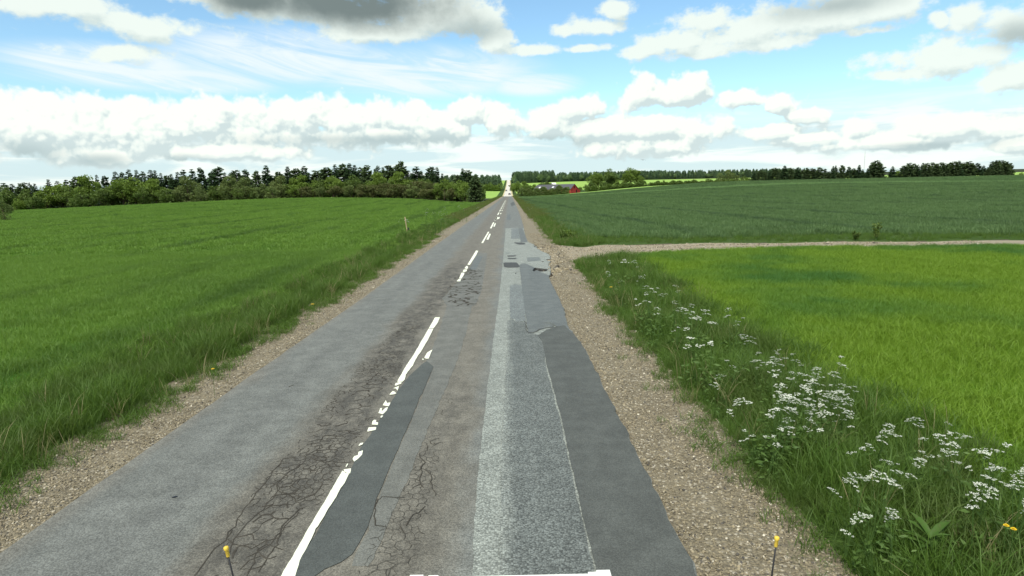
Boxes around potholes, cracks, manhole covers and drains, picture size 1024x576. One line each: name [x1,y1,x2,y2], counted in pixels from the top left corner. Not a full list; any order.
crack [194,319,420,576]
crack [359,398,452,576]
